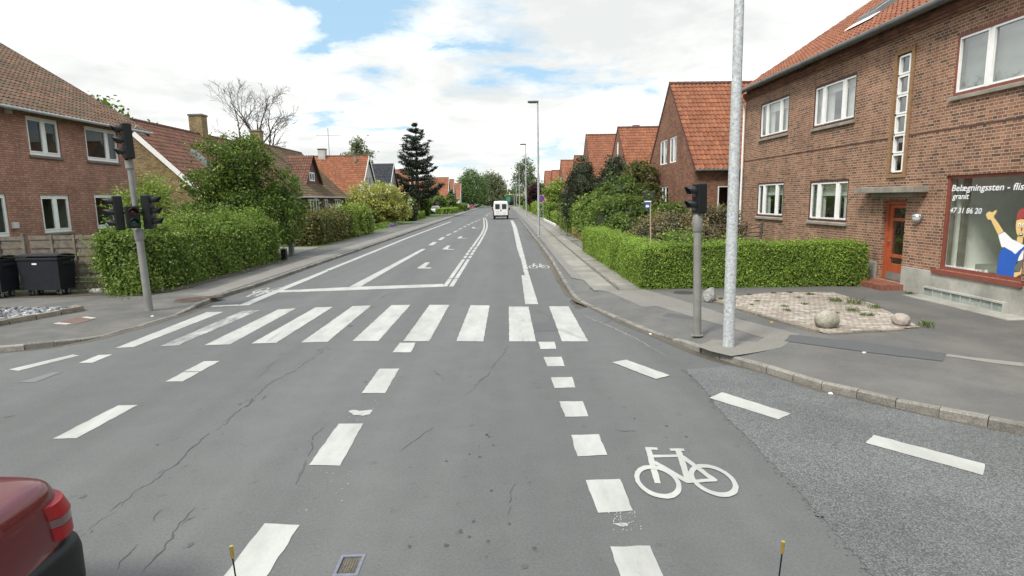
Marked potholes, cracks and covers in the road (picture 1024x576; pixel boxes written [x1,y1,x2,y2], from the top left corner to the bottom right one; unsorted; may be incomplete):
crack [118,507,195,568]
crack [81,355,316,536]
